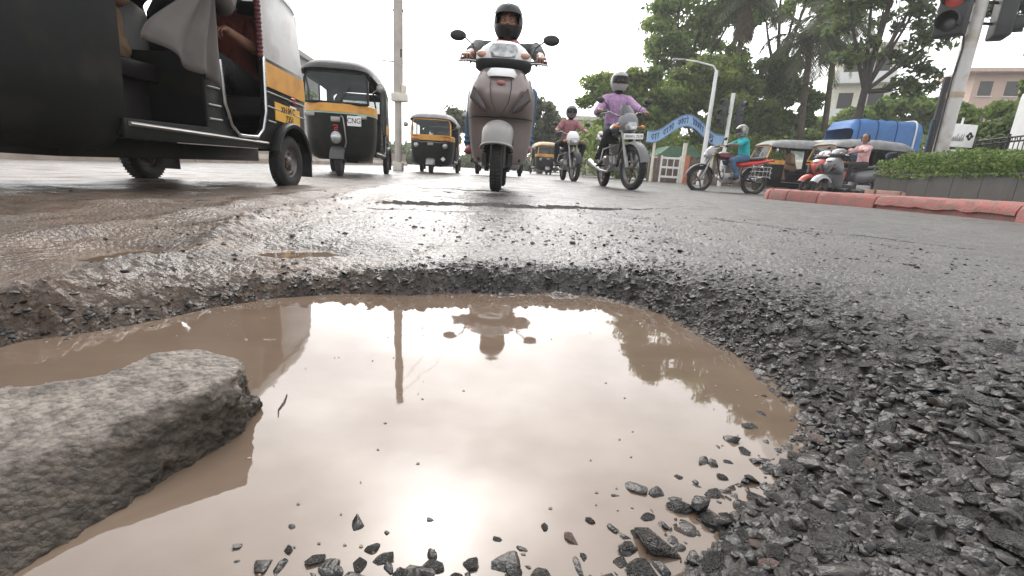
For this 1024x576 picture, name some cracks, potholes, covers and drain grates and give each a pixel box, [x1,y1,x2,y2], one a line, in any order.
pothole [0,263,1024,576]
